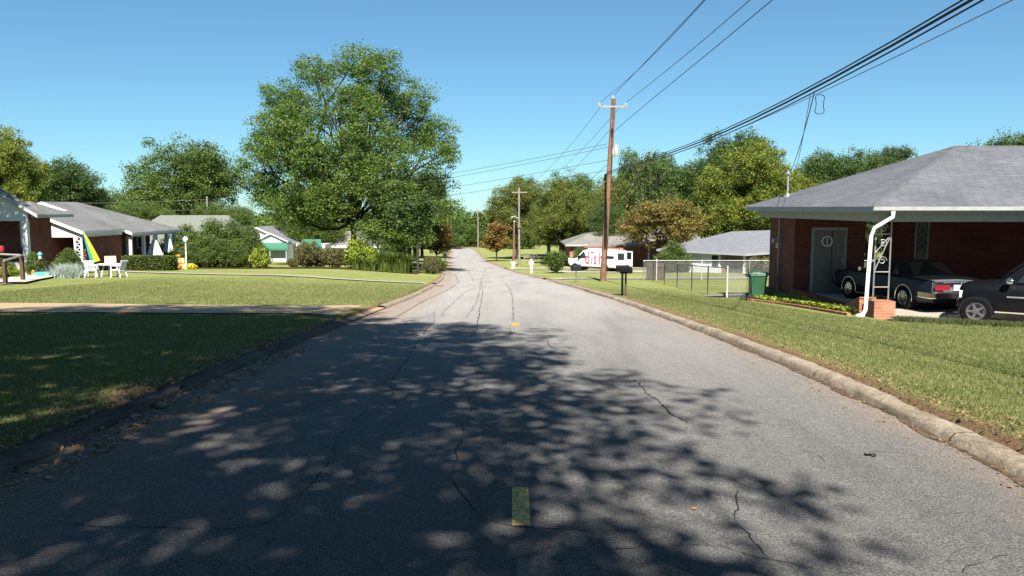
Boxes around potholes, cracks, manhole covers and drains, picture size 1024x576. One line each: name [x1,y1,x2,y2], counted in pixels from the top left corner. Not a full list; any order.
crack [43,270,617,531]
crack [634,490,859,574]
